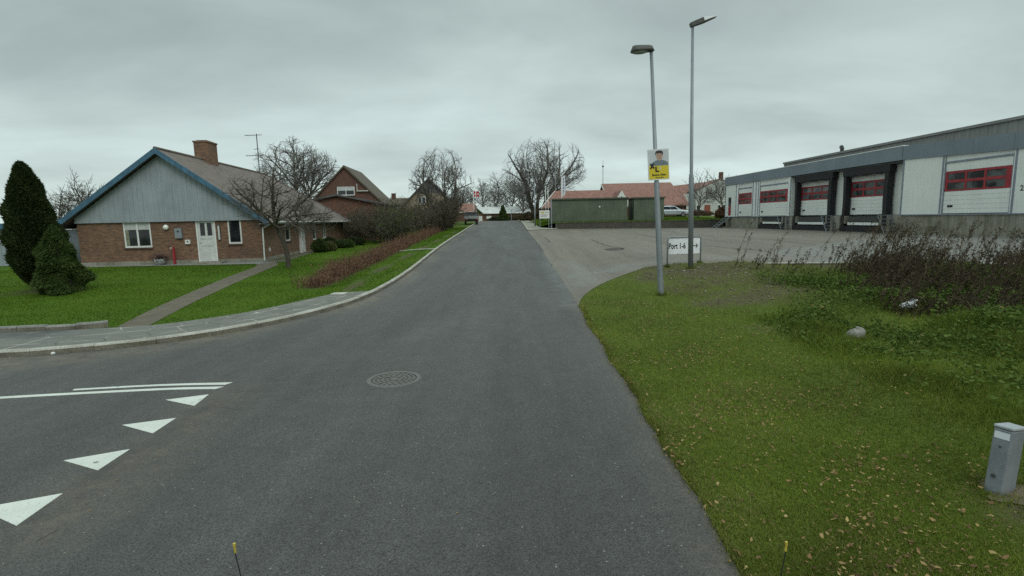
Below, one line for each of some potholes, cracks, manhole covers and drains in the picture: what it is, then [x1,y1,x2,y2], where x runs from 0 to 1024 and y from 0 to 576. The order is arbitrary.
manhole cover [366,371,421,387]
